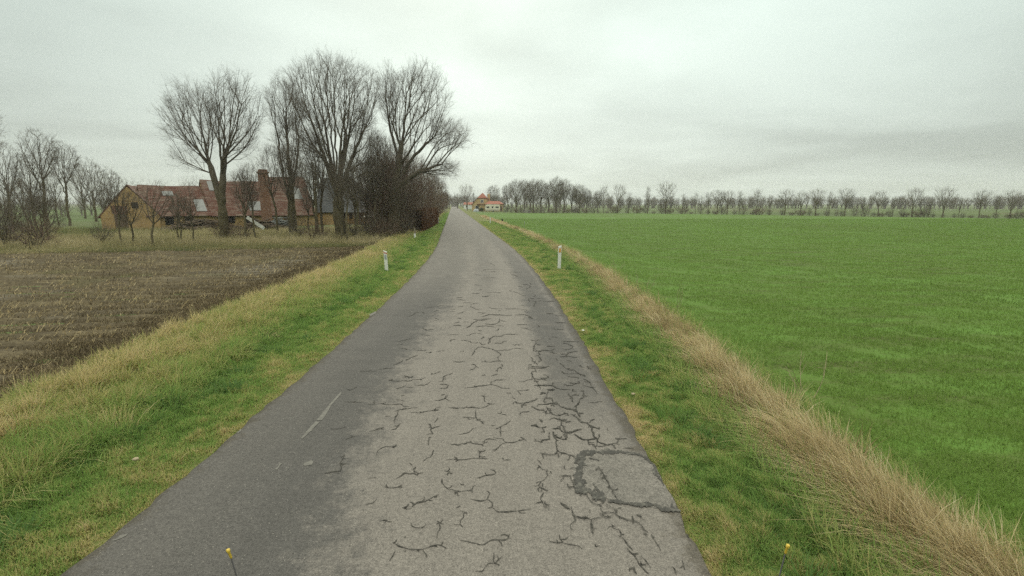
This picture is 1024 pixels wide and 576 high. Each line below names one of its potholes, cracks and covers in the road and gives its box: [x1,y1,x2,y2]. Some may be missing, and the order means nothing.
crack [345,262,661,574]
